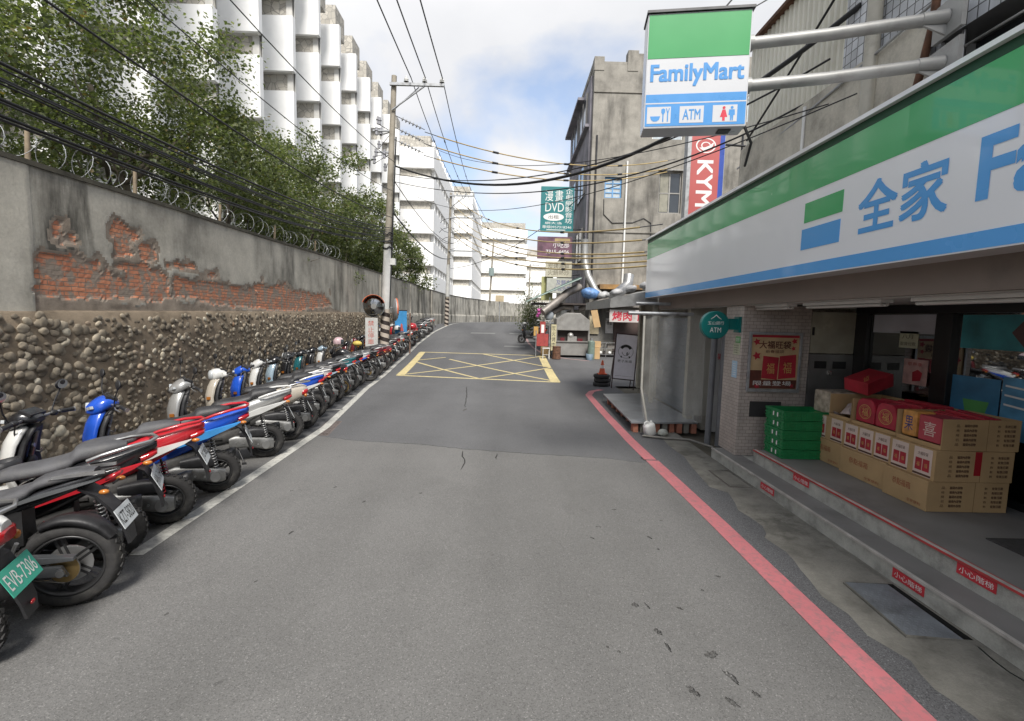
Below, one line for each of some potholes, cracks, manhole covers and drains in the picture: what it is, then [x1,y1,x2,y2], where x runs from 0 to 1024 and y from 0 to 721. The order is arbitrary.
manhole cover [843,582,975,641]
manhole cover [708,470,753,488]
